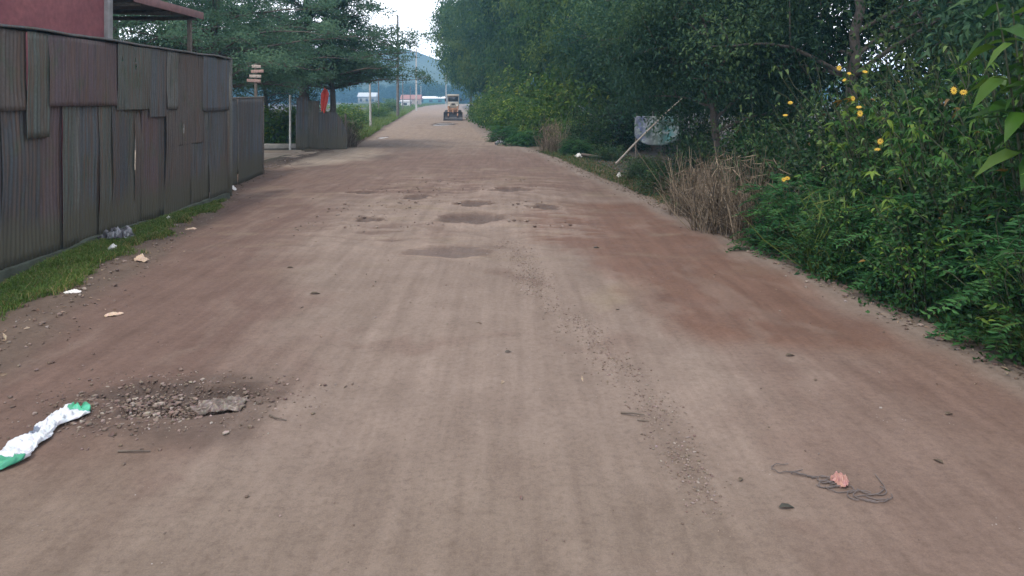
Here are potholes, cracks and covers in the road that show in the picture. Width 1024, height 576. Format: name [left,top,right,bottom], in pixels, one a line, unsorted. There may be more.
pothole [396,244,501,259]
pothole [63,376,292,424]
pothole [448,200,496,208]
pothole [352,215,388,223]
pothole [521,203,563,211]
pothole [429,210,516,227]
